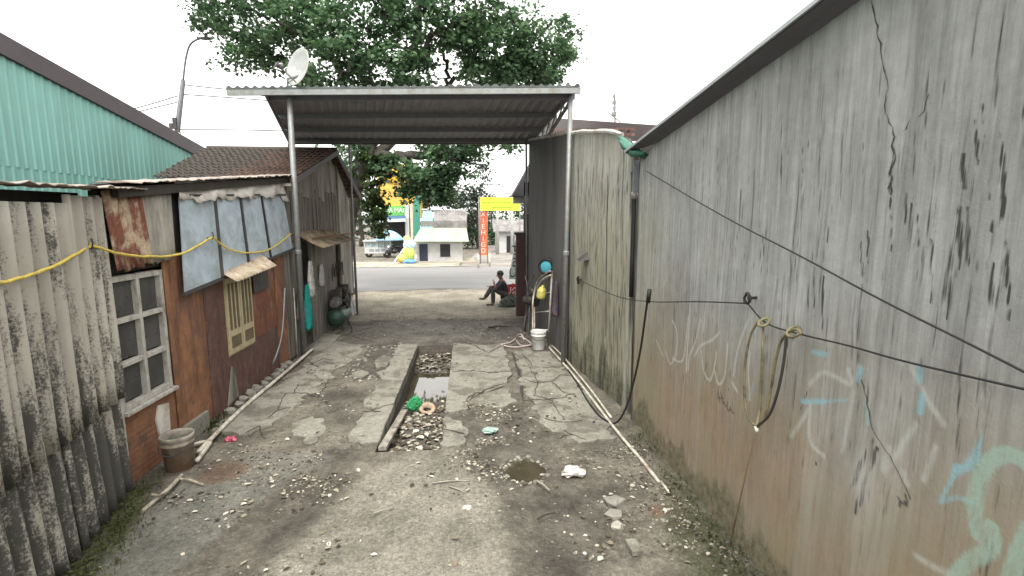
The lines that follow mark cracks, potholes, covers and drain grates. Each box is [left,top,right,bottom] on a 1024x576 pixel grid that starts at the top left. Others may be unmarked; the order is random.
pothole [499,455,551,485]
crack [246,359,336,439]
crack [519,357,586,440]
crack [453,370,506,410]
